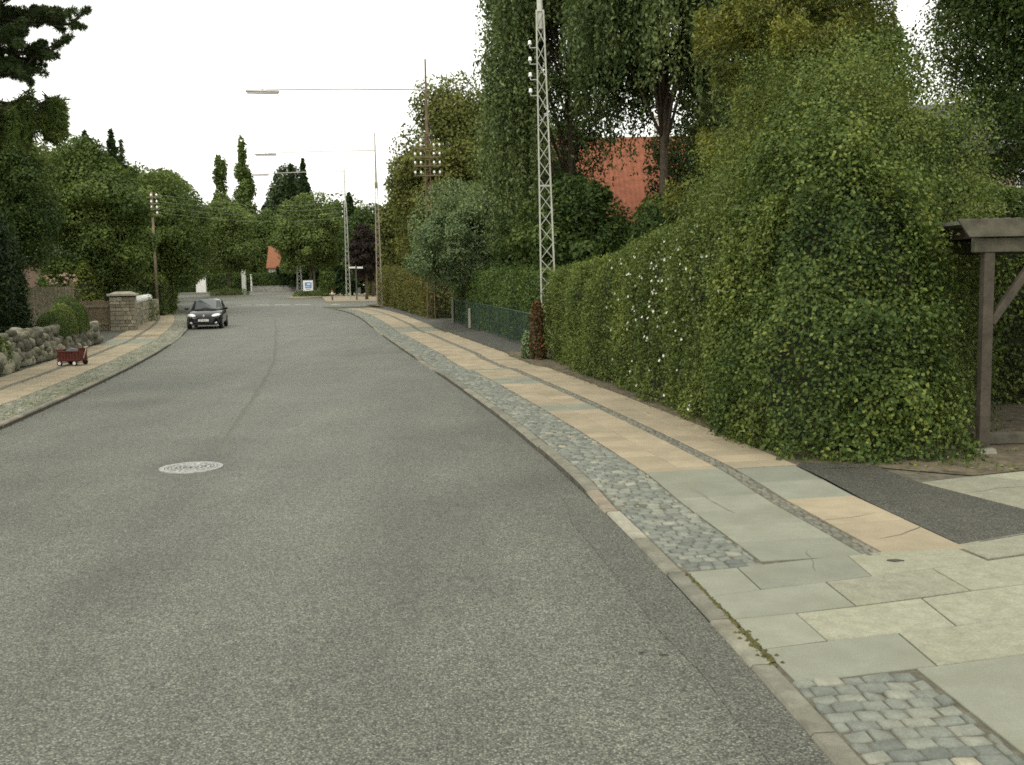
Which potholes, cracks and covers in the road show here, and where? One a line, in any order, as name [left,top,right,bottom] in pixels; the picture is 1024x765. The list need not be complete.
manhole cover [158,461,224,474]
